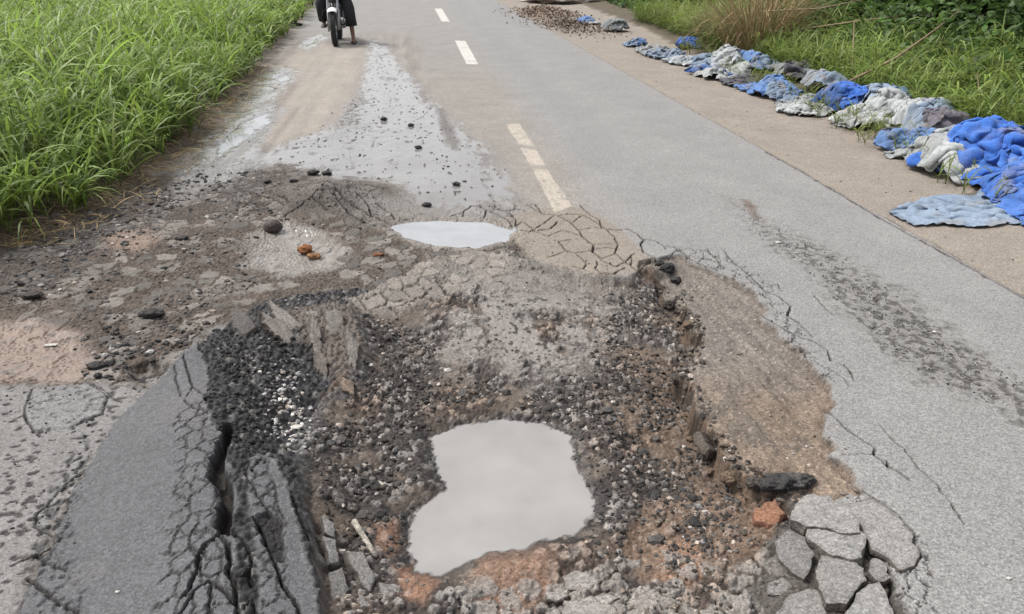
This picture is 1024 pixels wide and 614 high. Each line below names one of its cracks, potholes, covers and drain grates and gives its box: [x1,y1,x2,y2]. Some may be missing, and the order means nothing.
crack [449,204,856,387]
crack [0,379,109,433]
crack [827,412,966,614]
pothole [299,254,862,614]
